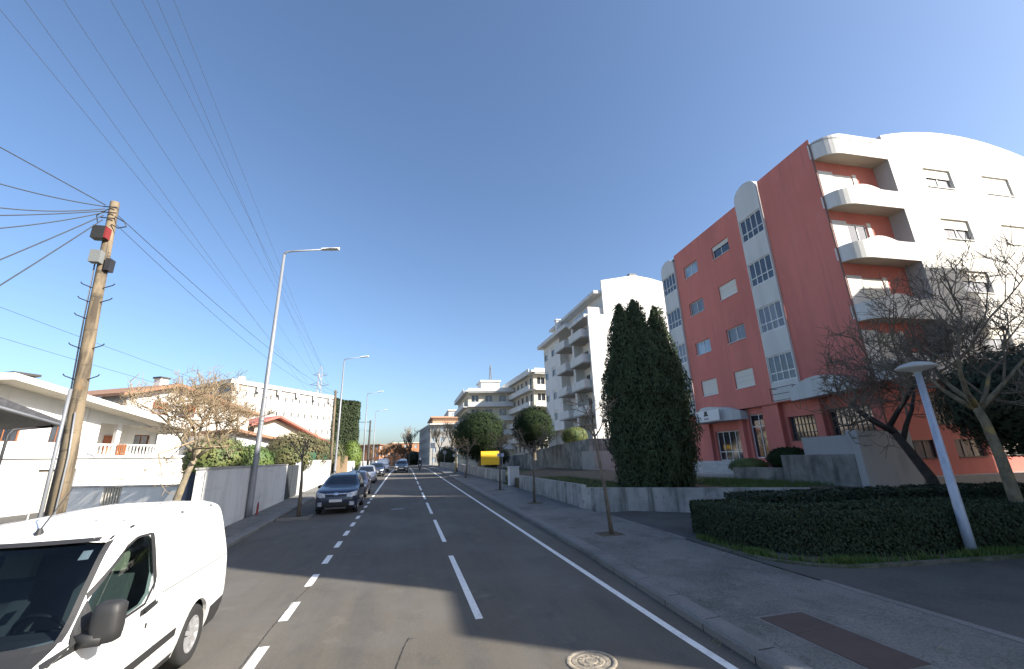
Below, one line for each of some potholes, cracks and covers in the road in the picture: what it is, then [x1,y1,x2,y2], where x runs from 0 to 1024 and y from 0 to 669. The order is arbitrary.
manhole cover [565,650,618,669]
